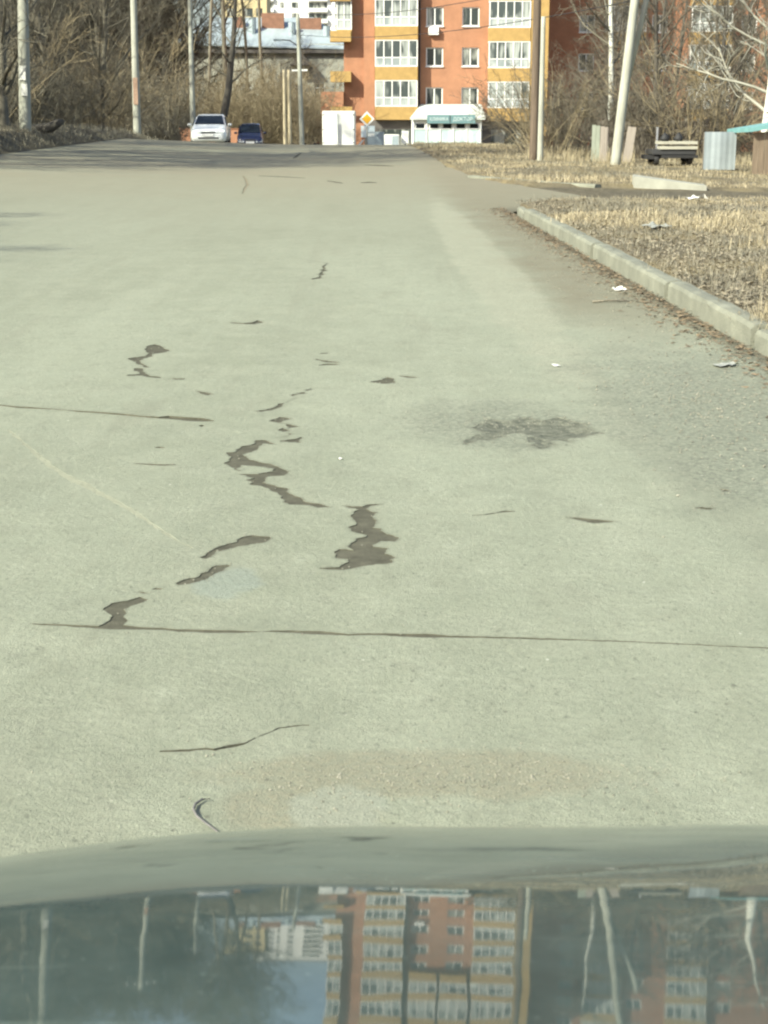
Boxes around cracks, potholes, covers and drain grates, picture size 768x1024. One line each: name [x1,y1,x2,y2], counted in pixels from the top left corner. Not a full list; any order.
crack [0,344,768,649]
crack [159,725,309,752]
